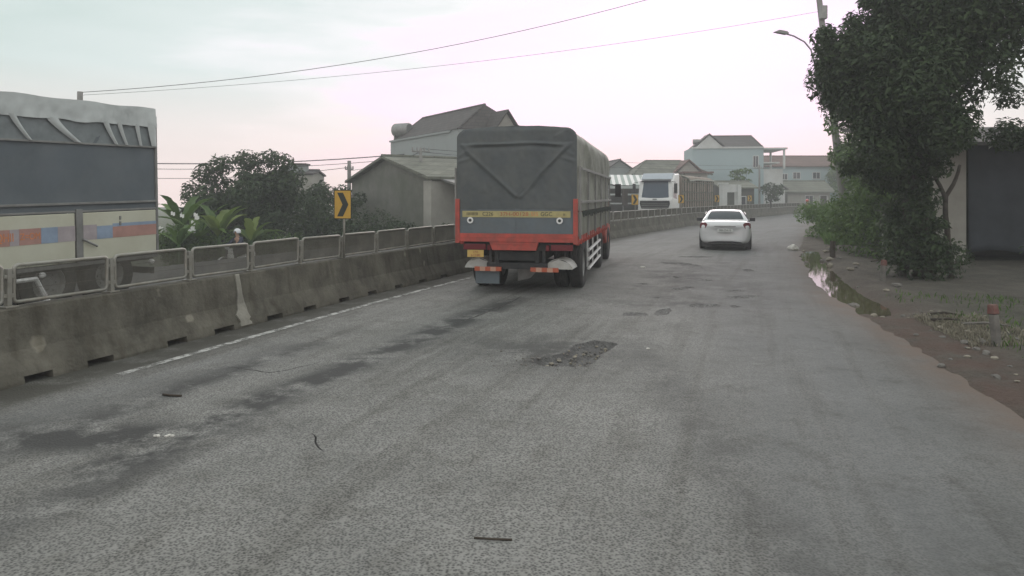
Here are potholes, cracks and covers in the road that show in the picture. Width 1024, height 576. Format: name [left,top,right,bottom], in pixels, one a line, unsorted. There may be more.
pothole [527,340,618,367]
